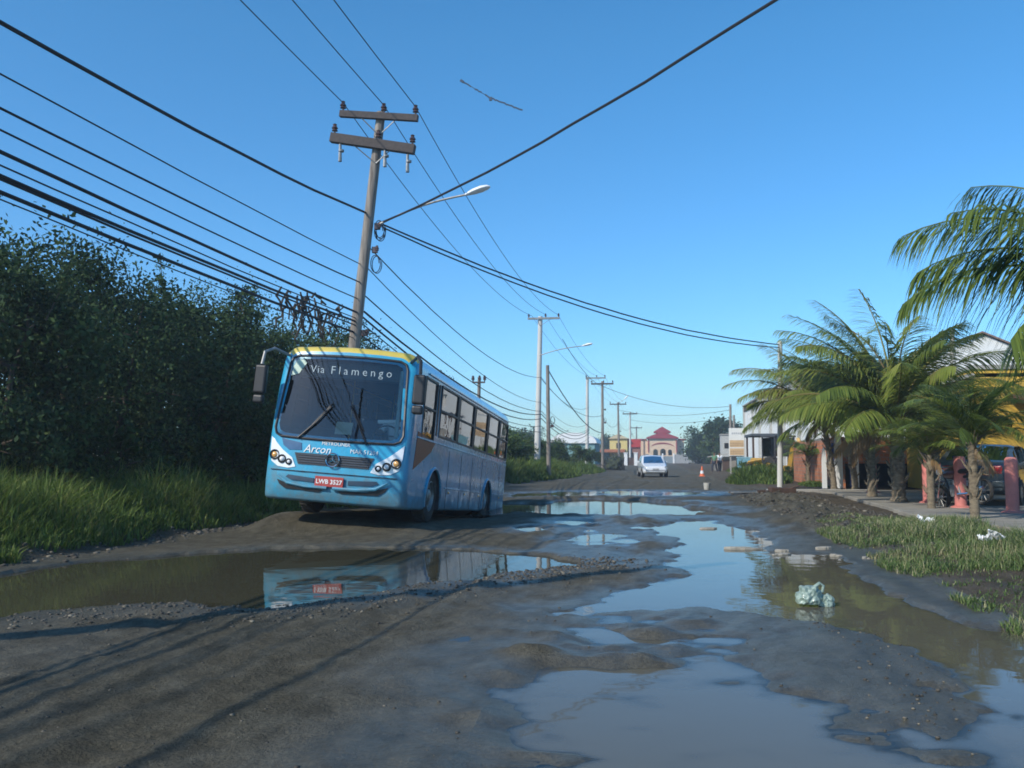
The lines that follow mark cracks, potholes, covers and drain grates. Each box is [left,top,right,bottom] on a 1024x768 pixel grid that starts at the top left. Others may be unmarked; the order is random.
pothole [440,497,720,518]
pothole [541,517,1024,768]
pothole [514,524,547,532]
pothole [446,610,952,768]
pothole [0,545,578,618]
